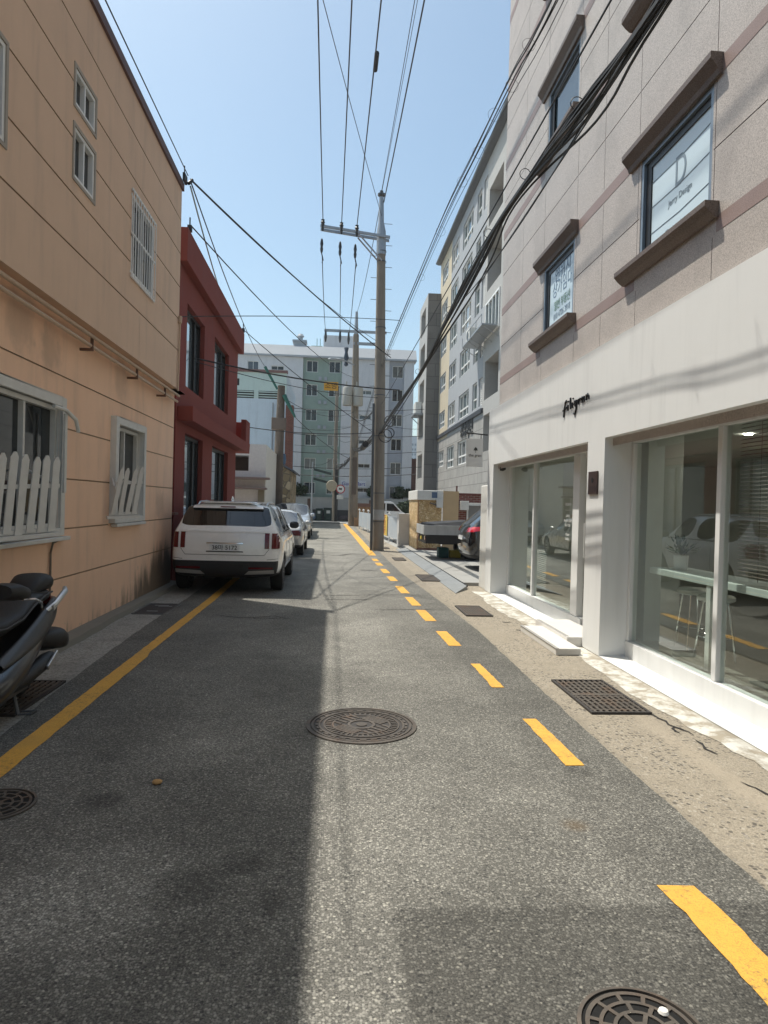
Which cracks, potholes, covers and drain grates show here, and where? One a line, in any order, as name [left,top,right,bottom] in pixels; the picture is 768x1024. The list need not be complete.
drain grate [551,679,652,715]
manhole cover [577,986,700,1024]
manhole cover [0,788,38,820]
manhole cover [306,708,417,745]
utility cover [131,603,181,615]
drain grate [0,680,66,717]
crack [653,714,716,754]
